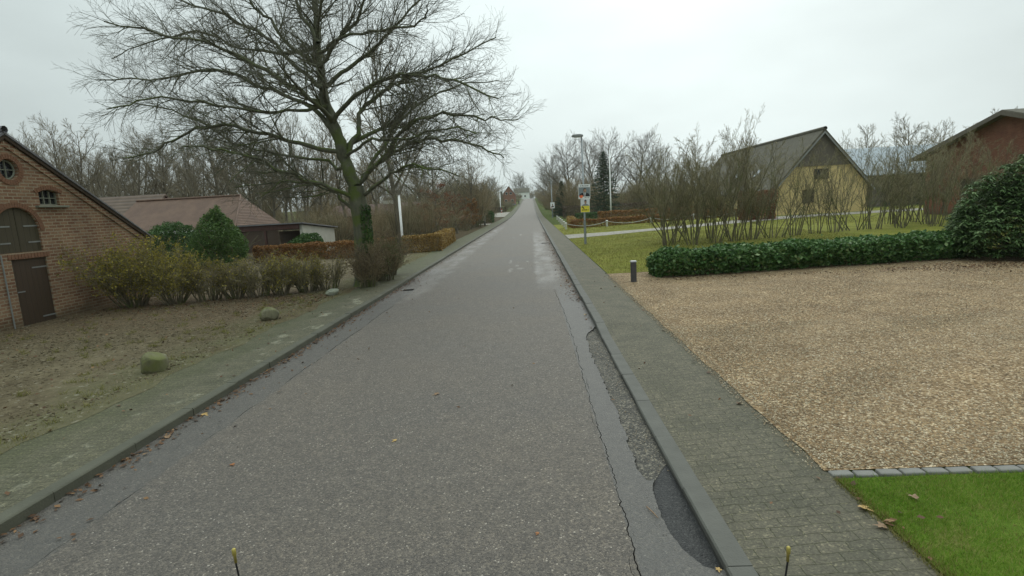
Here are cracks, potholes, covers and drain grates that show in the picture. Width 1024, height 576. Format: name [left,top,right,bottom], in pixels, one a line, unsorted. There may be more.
crack [557,297,641,576]
pothole [653,464,723,570]
pothole [586,327,667,481]
